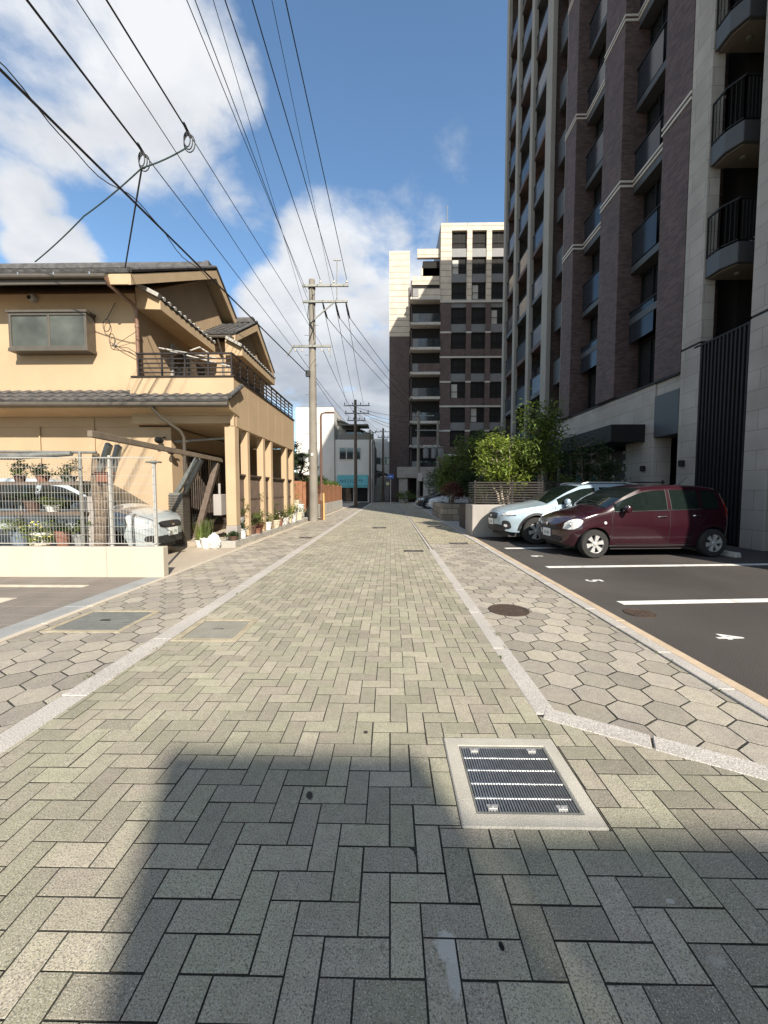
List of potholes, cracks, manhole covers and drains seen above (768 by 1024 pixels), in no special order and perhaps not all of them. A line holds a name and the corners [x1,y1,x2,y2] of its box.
manhole cover [488,604,530,617]
manhole cover [623,608,657,618]
utility cover [170,618,259,642]
utility cover [39,610,162,633]
drain grate [443,738,609,831]
